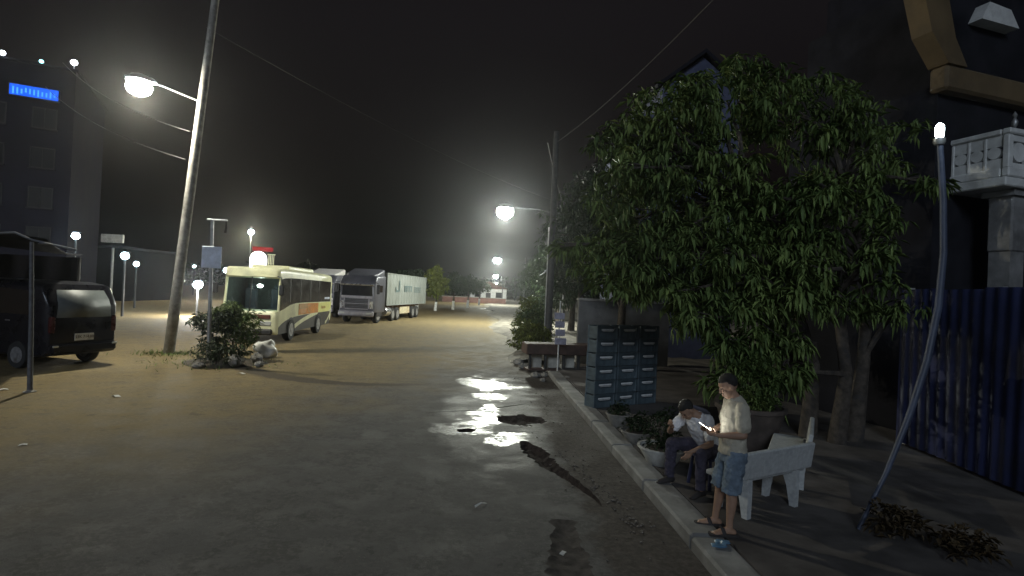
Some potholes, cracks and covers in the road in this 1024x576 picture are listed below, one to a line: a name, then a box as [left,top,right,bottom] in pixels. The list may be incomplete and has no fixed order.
pothole [519,441,603,507]
pothole [544,519,594,576]
pothole [497,414,547,427]
